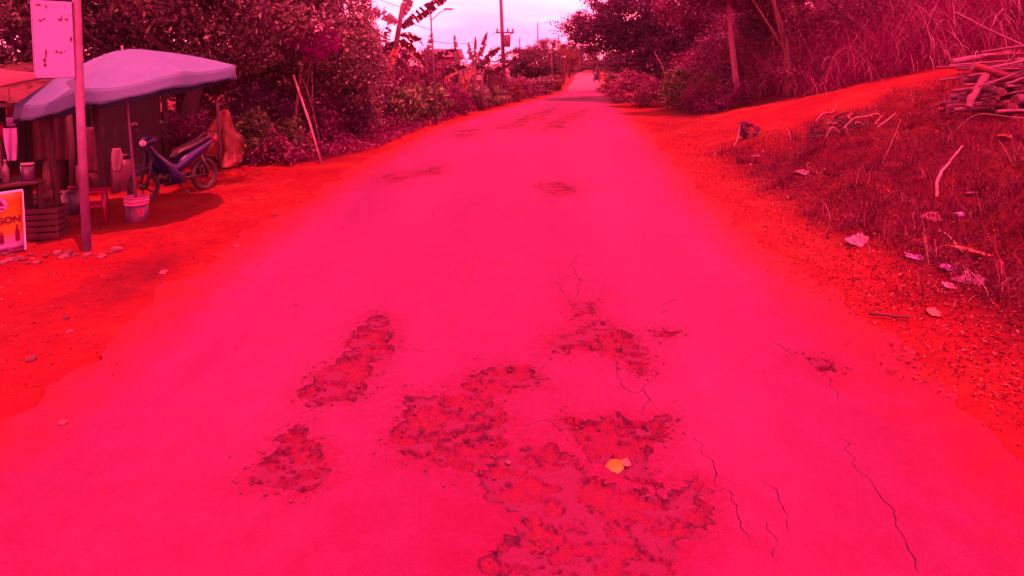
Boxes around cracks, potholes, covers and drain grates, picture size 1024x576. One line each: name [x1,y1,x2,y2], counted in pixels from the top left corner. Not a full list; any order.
pothole [543,320,654,376]
crack [833,436,918,571]
pothole [388,365,541,472]
pothole [247,423,332,493]
pothole [538,182,574,195]
crack [693,437,789,557]
pothole [382,166,442,182]
crack [614,361,651,413]
pothole [475,442,716,576]
pothole [296,315,395,408]
pothole [652,330,682,338]
pothole [559,411,673,491]
